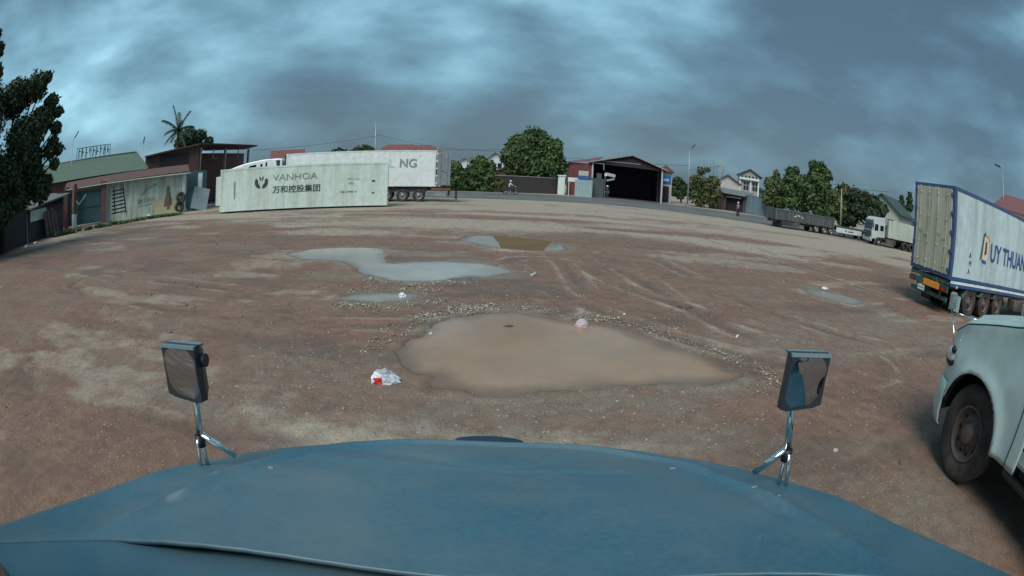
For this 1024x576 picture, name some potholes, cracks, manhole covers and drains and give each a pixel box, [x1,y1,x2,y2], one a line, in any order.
pothole [283,246,521,284]
pothole [382,309,756,405]
pothole [326,289,427,306]
pothole [454,235,572,253]
pothole [795,286,868,307]
